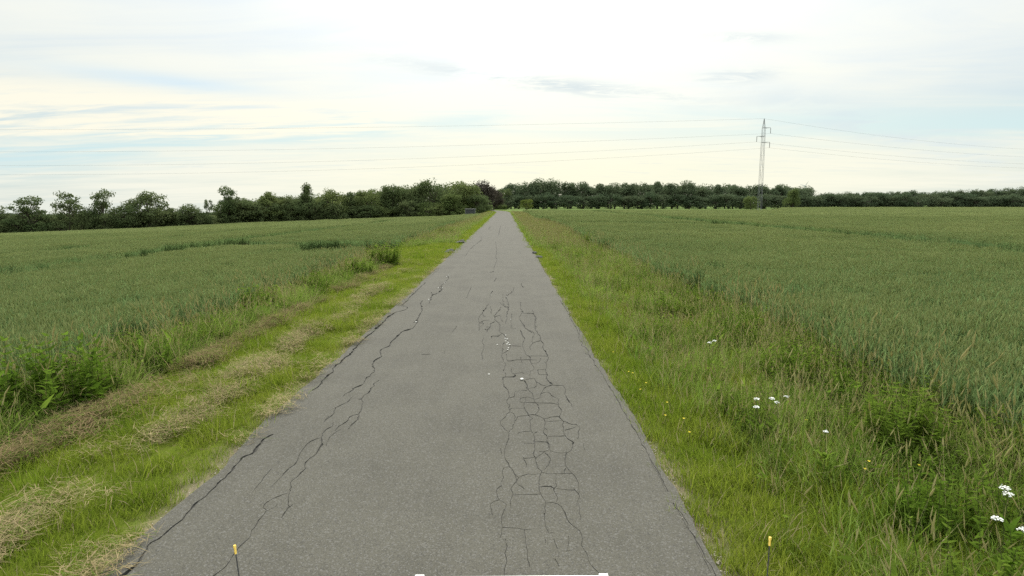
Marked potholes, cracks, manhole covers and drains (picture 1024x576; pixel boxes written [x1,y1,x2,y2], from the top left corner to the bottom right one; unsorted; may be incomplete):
crack [120,276,449,576]
crack [466,283,600,576]
